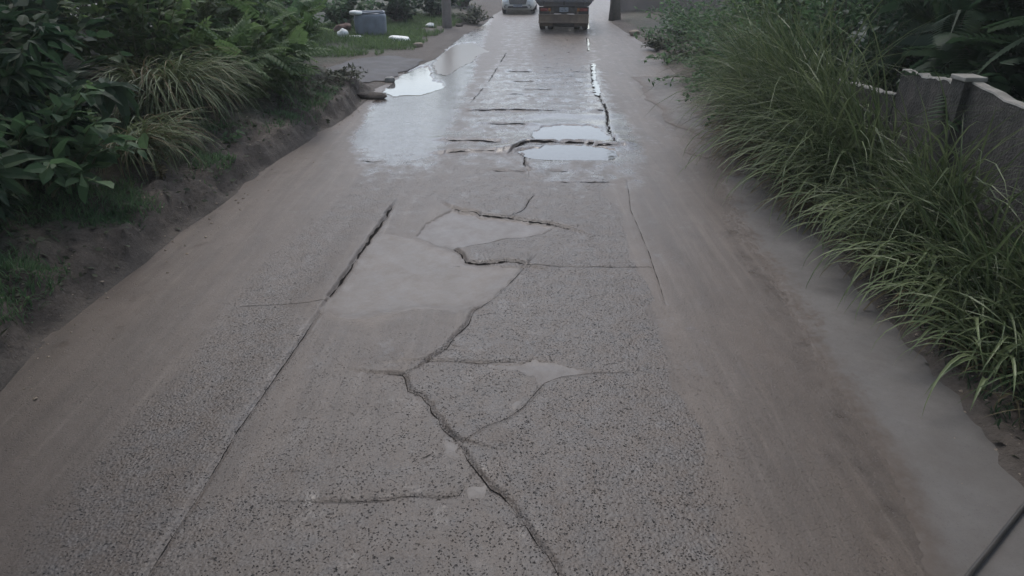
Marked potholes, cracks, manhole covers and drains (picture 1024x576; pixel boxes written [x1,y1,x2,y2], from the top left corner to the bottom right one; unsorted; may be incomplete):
crack [467,54,621,183]
crack [310,372,609,576]
pothole [532,125,610,140]
pothole [516,145,619,161]
crack [427,194,595,364]
